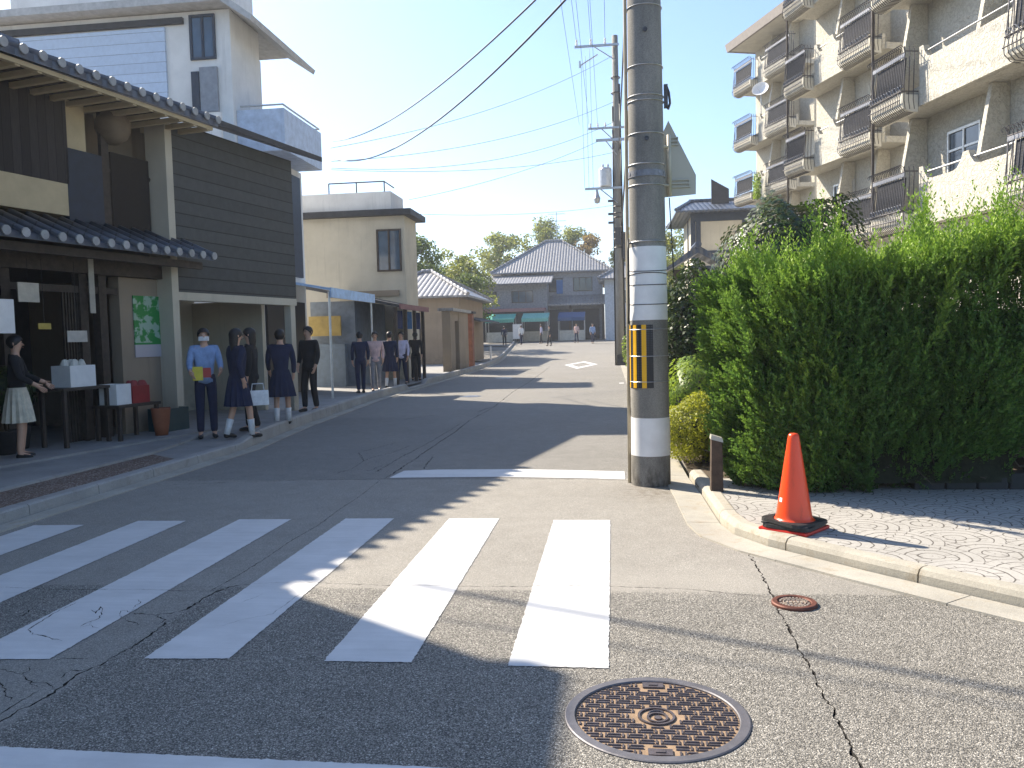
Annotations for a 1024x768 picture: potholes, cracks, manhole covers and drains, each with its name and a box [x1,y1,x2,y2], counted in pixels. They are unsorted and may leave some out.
manhole cover [565,677,752,764]
crack [748,555,864,768]
manhole cover [771,595,818,612]
